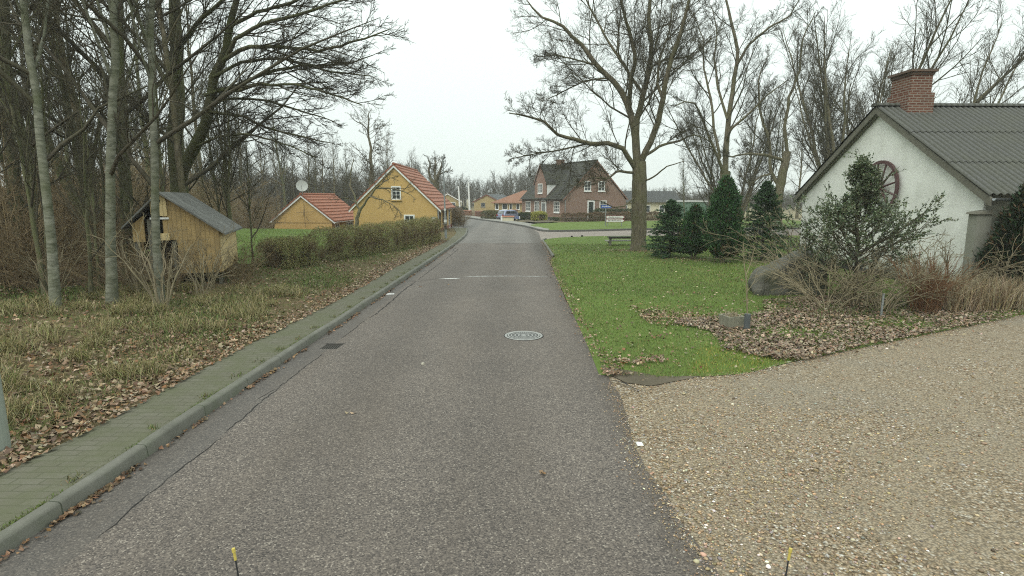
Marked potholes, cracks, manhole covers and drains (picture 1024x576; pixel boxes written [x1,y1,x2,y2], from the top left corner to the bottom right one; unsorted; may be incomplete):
manhole cover [504,331,544,341]
